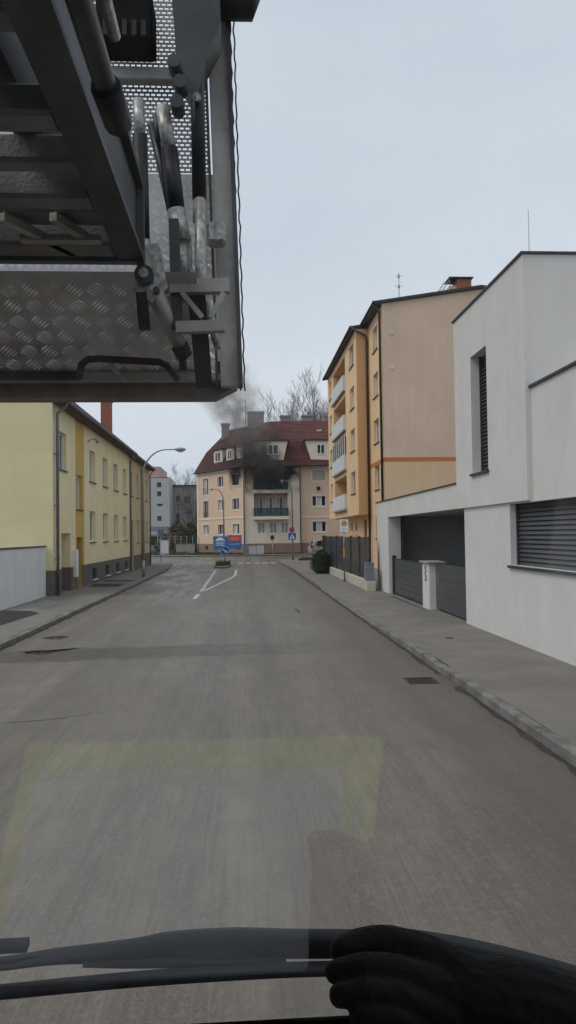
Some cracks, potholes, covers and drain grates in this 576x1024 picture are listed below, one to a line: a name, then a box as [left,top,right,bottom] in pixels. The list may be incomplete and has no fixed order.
drain grate [403,677,440,685]
